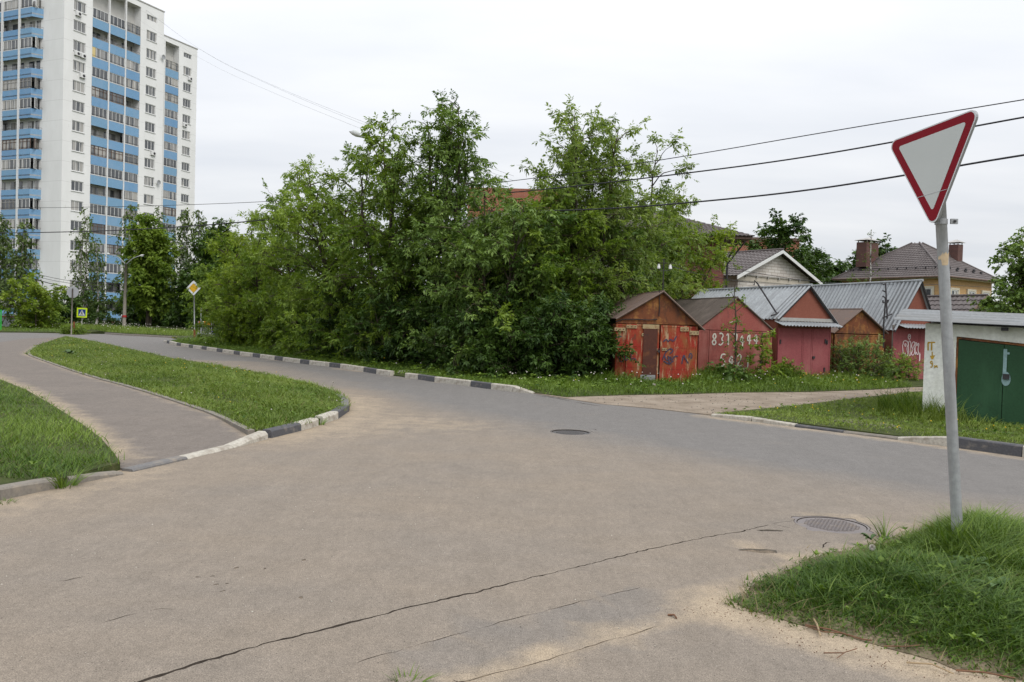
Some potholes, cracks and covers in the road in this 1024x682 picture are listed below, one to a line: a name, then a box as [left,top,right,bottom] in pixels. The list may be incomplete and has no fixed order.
crack [138,521,789,682]
manhole cover [791,516,874,534]
